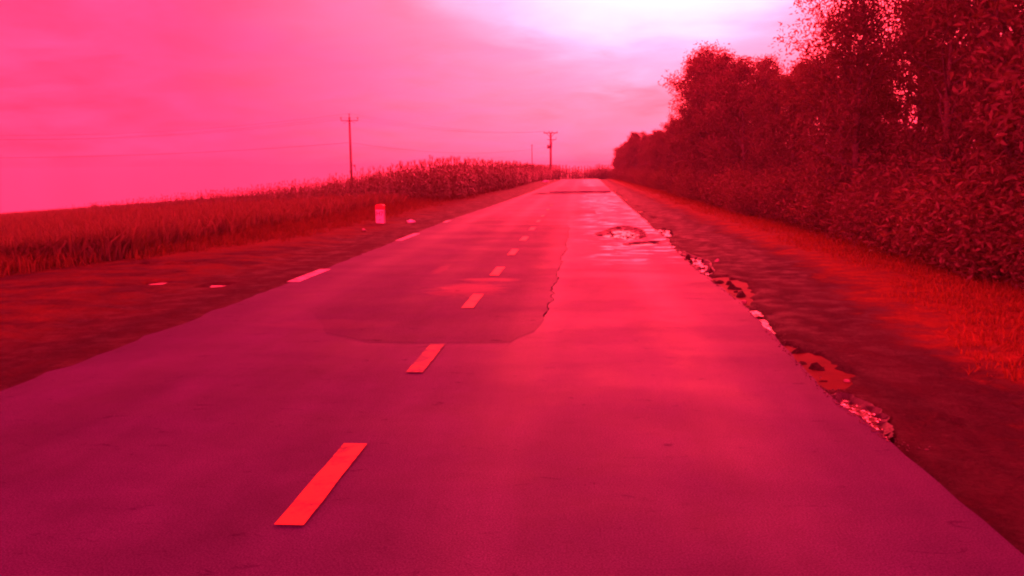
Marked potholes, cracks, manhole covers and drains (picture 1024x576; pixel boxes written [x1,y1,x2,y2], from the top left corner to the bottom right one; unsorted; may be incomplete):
crack [543,228,570,317]
pothole [678,250,715,276]
pothole [830,393,894,441]
pothole [593,226,648,240]
